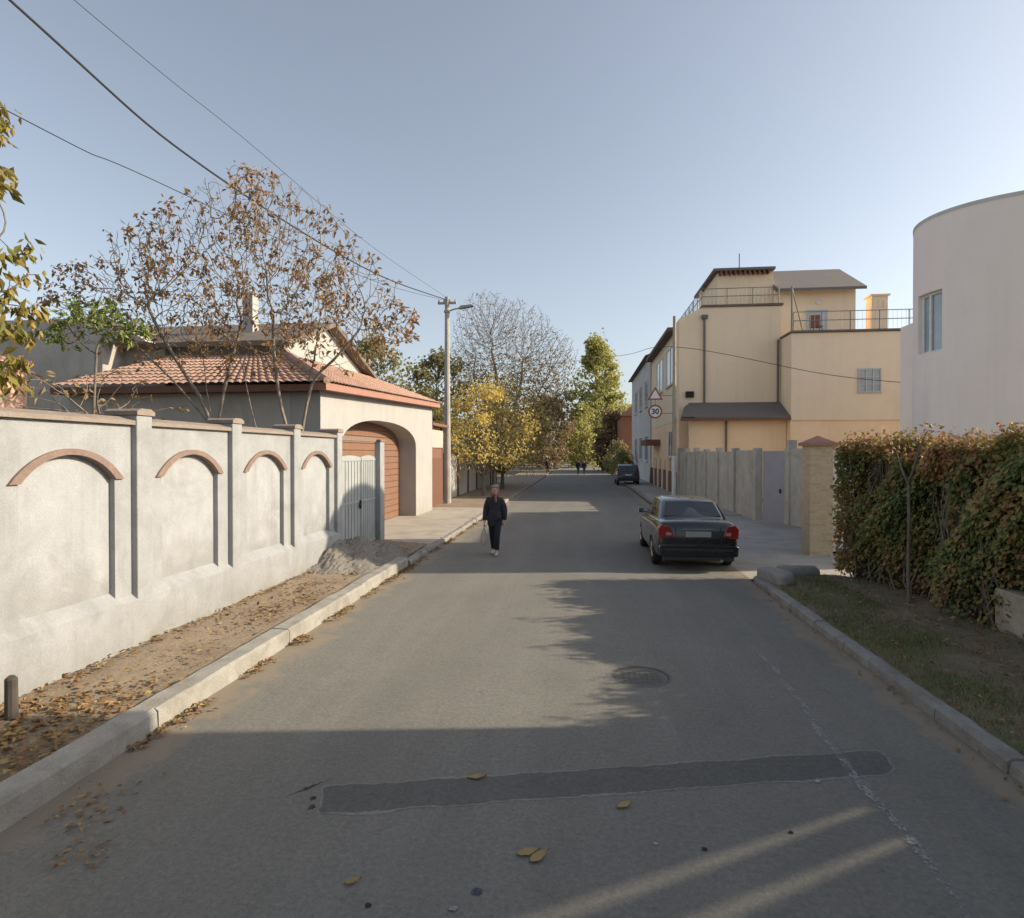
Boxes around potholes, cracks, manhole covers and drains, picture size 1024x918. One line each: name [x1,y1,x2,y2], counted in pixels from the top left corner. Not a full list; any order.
manhole cover [611,666,672,688]
